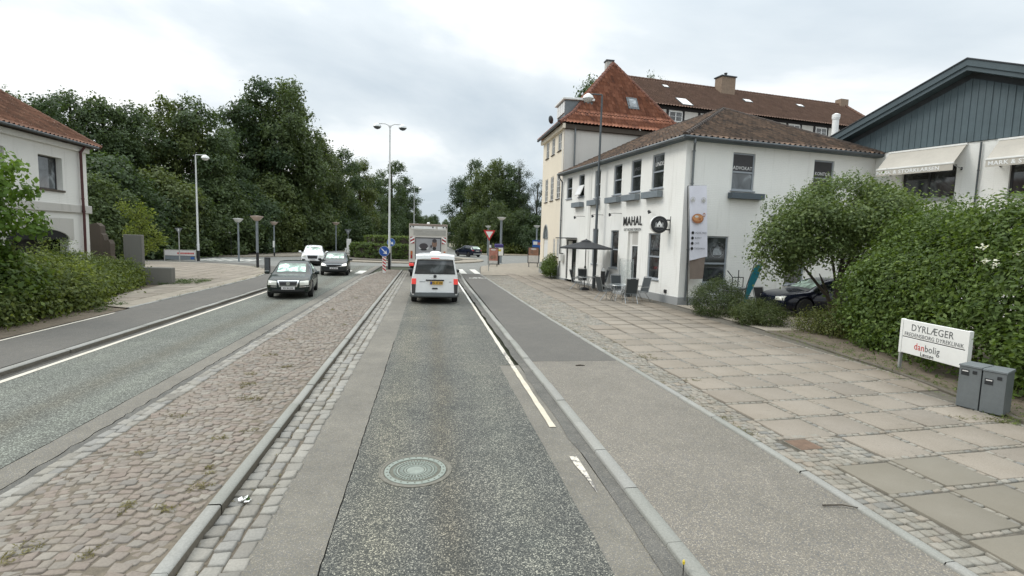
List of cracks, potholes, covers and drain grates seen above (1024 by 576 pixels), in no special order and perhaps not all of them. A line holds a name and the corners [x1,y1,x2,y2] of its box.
manhole cover [378,455,452,488]
manhole cover [782,439,824,452]
